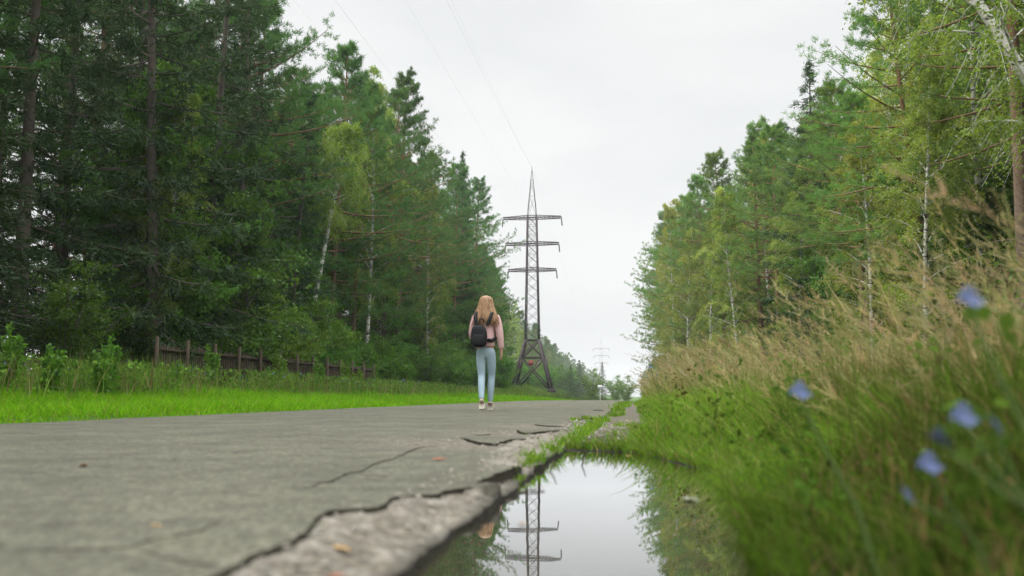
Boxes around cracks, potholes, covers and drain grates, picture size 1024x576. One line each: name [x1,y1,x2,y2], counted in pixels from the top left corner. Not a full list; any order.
crack [461,410,603,446]
crack [29,446,525,576]
